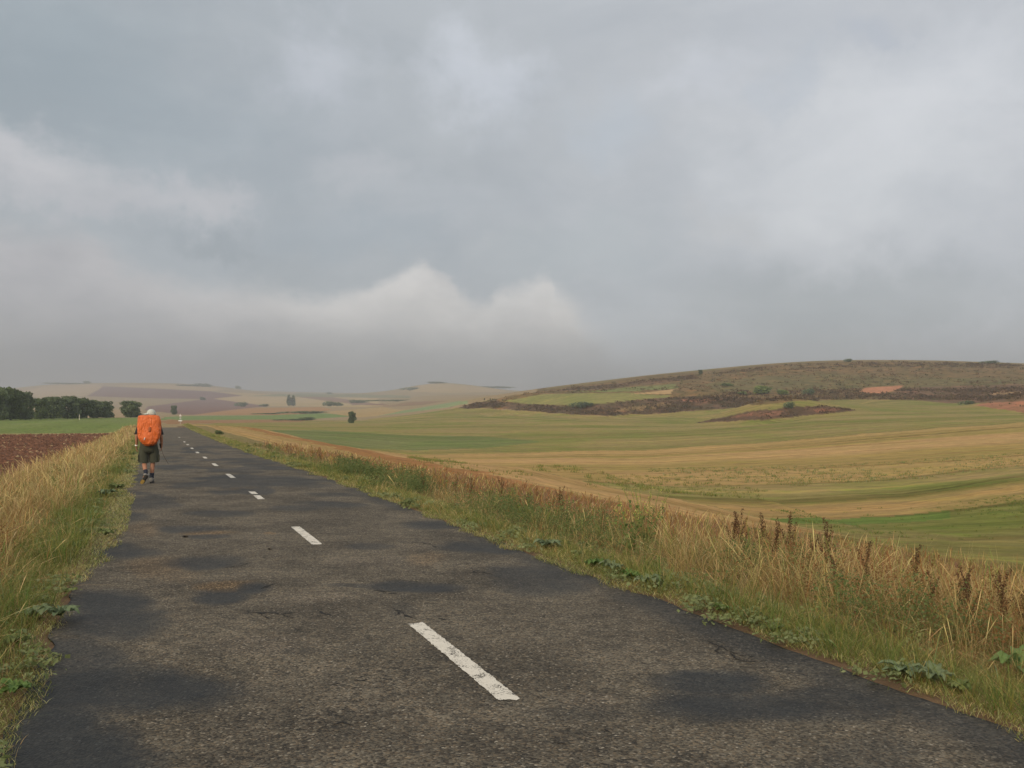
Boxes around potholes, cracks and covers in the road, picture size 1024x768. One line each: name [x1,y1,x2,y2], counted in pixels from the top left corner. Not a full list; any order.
crack [698,639,752,662]
